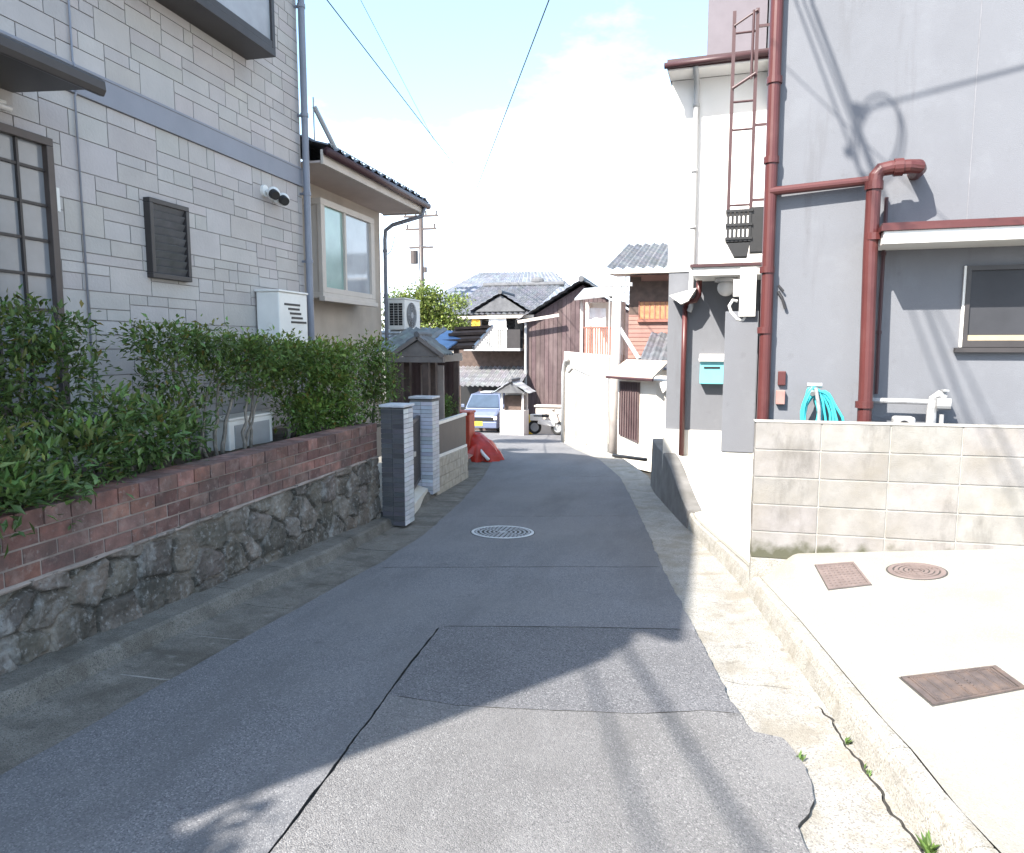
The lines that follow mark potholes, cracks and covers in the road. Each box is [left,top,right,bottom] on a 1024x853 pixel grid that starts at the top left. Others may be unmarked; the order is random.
manhole cover [470,526,535,539]
manhole cover [899,665,1024,707]
manhole cover [886,562,948,580]
crack [819,707,924,853]
manhole cover [815,561,872,590]
